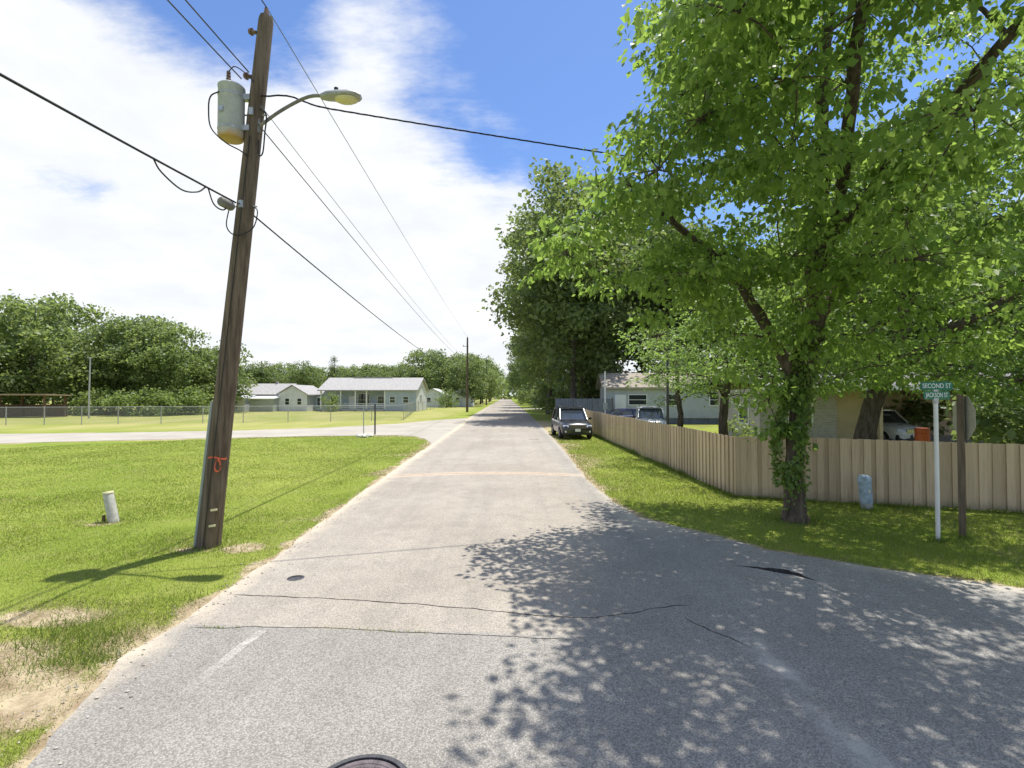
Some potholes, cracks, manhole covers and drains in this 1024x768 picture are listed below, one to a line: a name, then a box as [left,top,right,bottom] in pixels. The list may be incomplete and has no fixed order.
crack [235,594,751,648]
